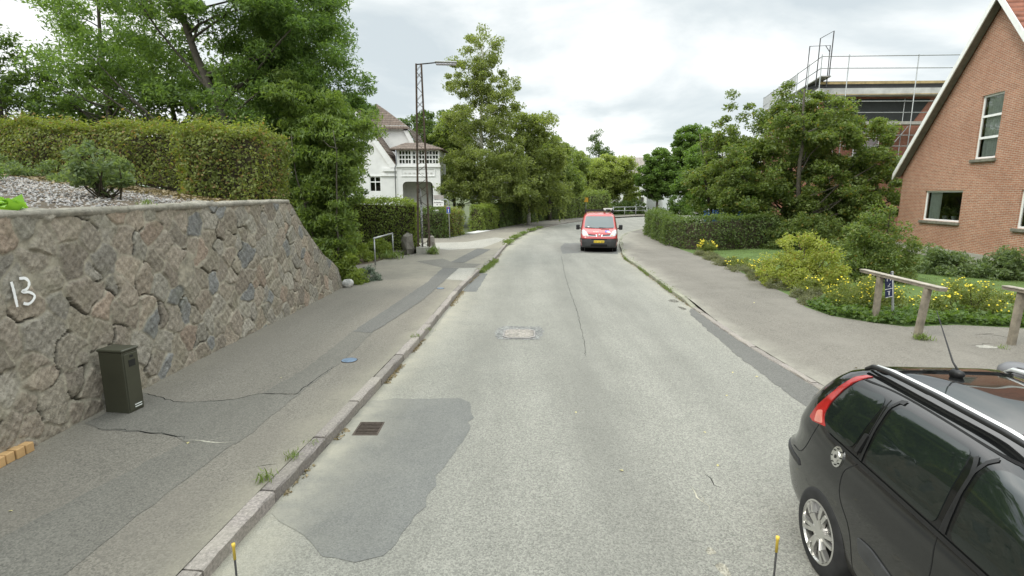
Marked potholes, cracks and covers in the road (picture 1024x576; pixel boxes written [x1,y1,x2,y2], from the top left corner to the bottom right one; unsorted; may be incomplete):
manhole cover [495,326,544,340]
drain grate [352,422,385,435]
crack [146,368,332,402]
crack [124,429,236,443]
